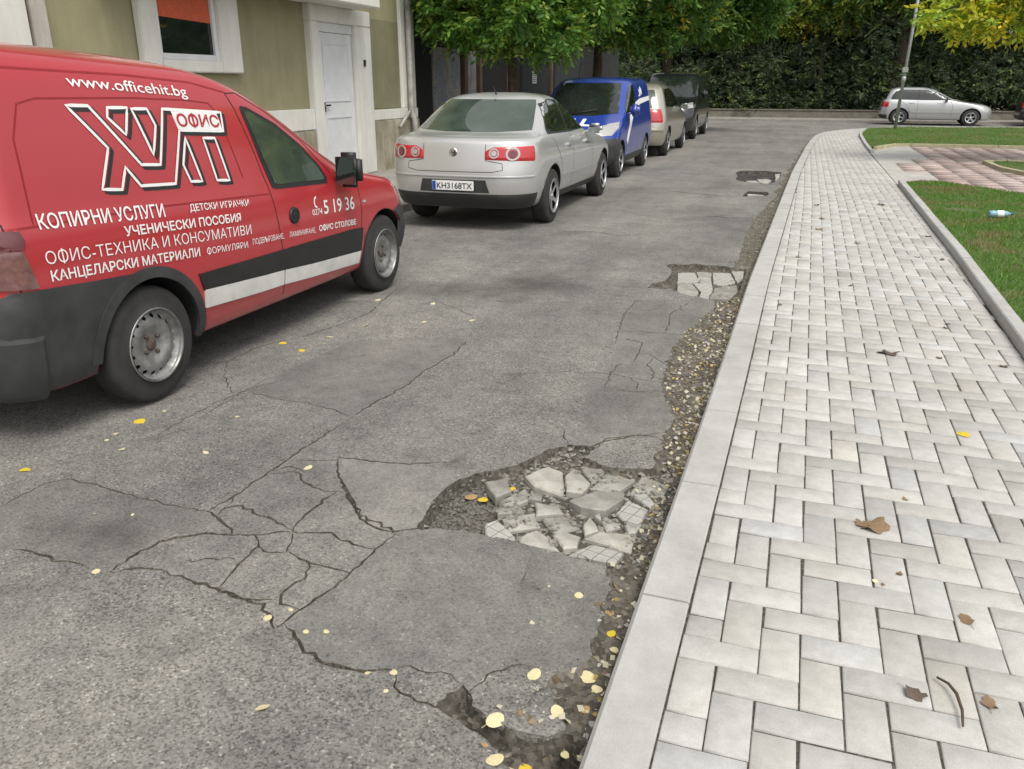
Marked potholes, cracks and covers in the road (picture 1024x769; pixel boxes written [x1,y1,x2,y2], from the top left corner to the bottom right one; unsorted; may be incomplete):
crack [1,291,524,708]
pothole [648,264,746,303]
pothole [417,444,678,569]
crack [545,301,688,392]
pothole [436,685,586,769]
pothole [736,171,781,183]
